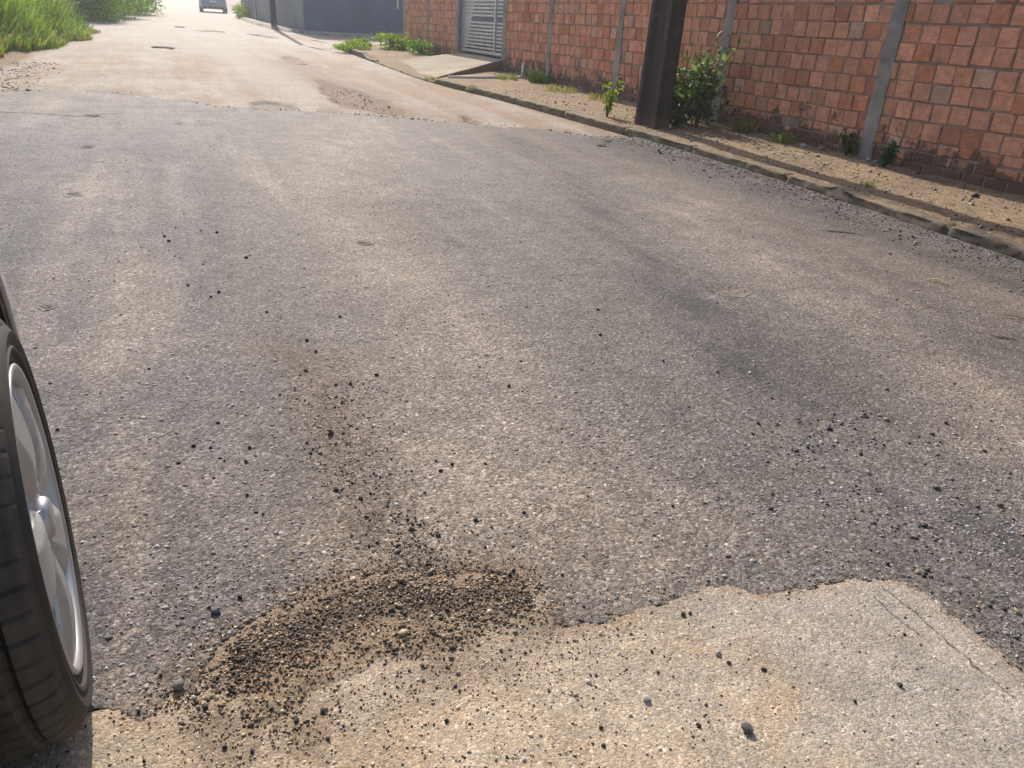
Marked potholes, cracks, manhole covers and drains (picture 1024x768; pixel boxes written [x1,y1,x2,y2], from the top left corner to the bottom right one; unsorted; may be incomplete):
pothole [246,100,300,111]
pothole [0,571,1024,768]
crack [872,584,1016,697]
pothole [306,74,412,116]
